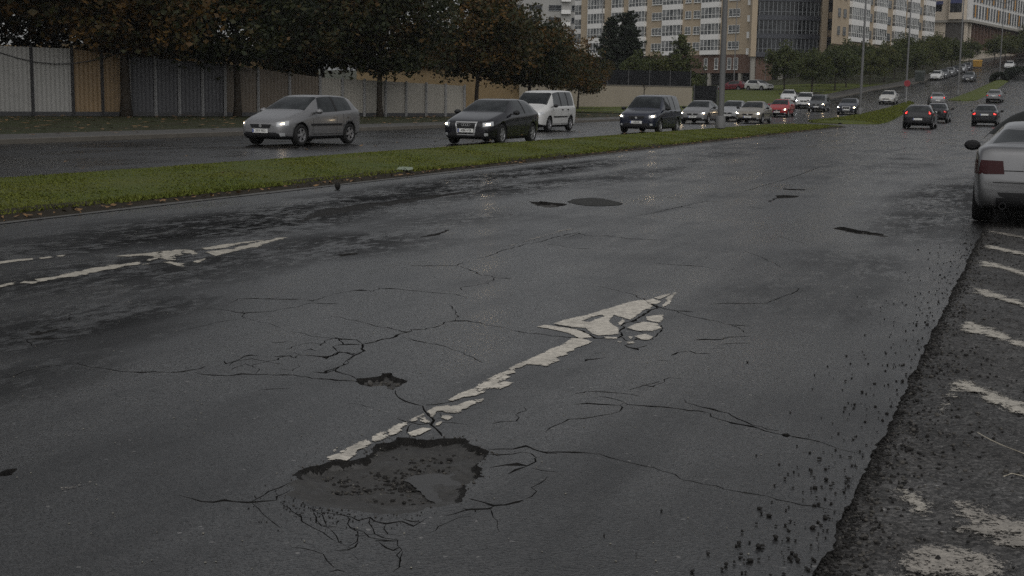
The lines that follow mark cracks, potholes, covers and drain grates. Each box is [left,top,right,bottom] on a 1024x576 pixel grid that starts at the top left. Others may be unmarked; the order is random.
crack [183,381,861,573]
pothole [356,373,407,390]
crack [77,233,799,390]
pothole [287,437,489,514]
